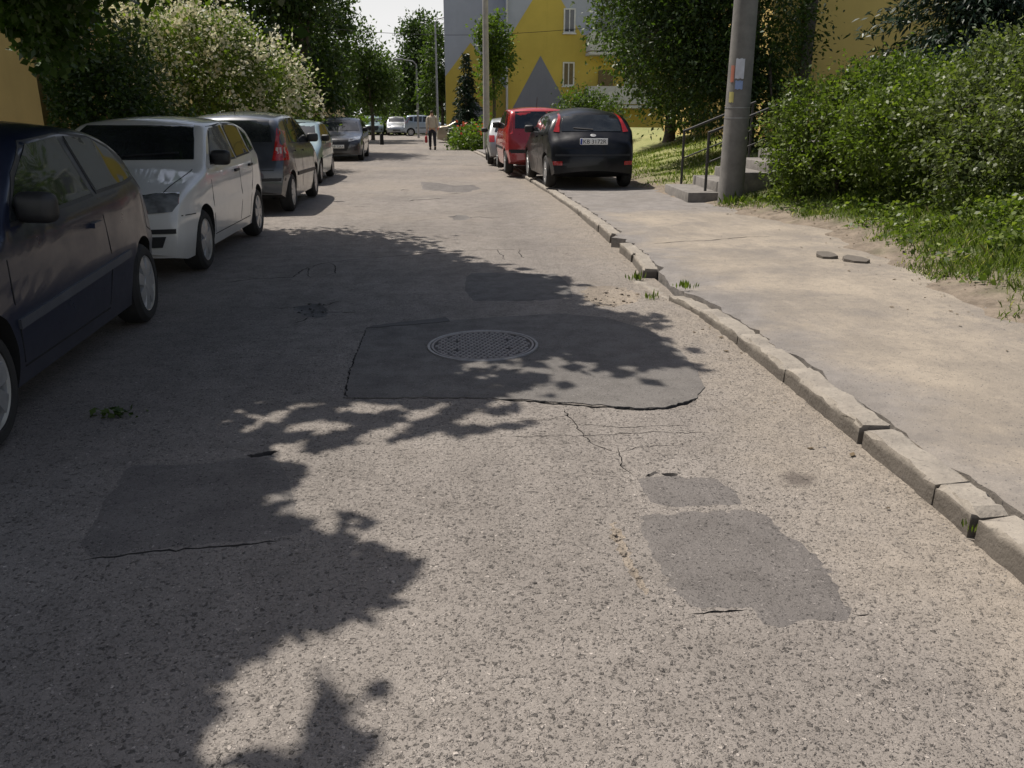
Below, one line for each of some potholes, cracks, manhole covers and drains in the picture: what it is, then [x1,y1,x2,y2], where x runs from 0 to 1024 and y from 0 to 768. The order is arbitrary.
pothole [293,303,329,318]
manhole cover [427,330,539,361]
crack [227,249,524,283]
crack [344,333,706,477]
